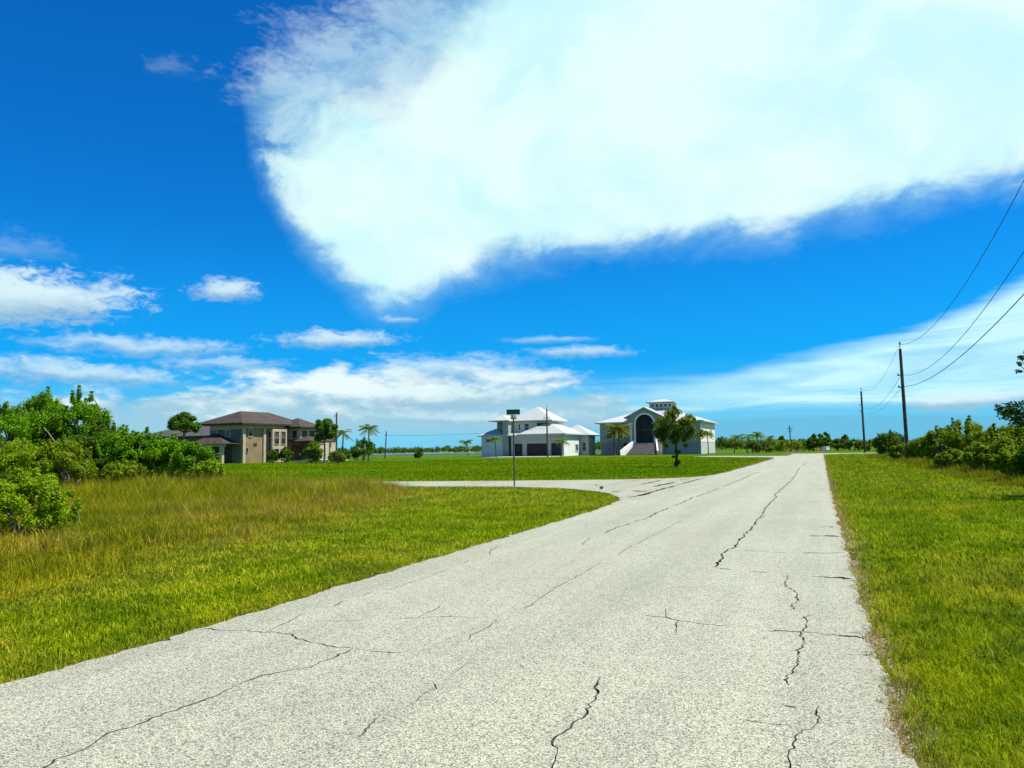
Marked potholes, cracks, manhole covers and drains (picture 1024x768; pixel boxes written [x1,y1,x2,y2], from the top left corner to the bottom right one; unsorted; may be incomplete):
crack [773,576,864,684]
crack [713,463,841,573]
crack [745,705,821,768]
crack [43,472,758,768]
